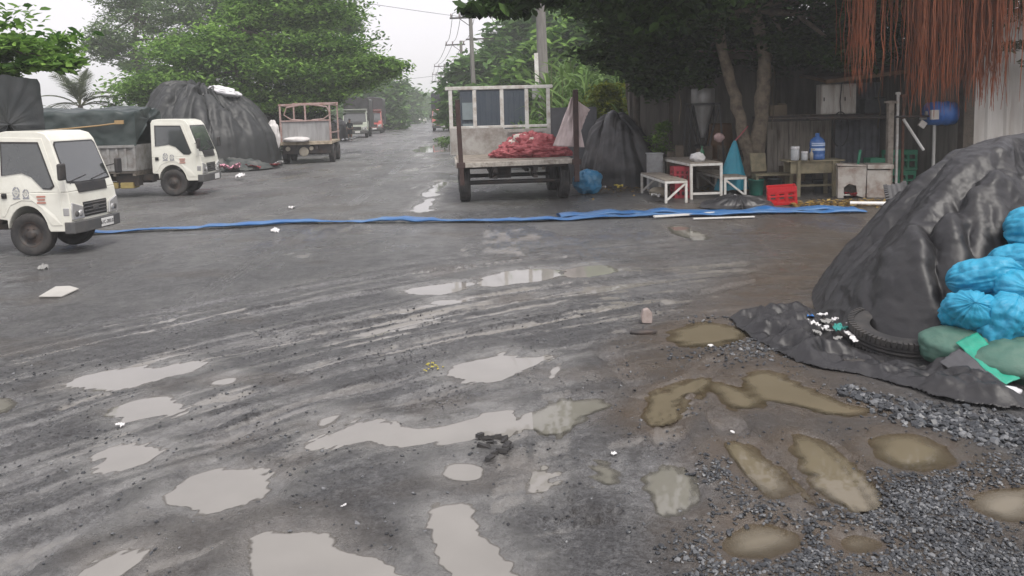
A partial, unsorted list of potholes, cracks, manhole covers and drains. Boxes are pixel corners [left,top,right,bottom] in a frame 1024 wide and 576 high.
pothole [59,360,210,392]
pothole [557,263,620,278]
pothole [858,427,970,474]
pothole [717,443,805,499]
pothole [629,378,712,428]
pothole [410,494,530,576]
pothole [150,460,286,519]
pothole [516,393,619,440]
pothole [696,378,772,411]
pothole [776,433,881,514]
pothole [439,347,558,385]
pothole [819,521,898,558]
